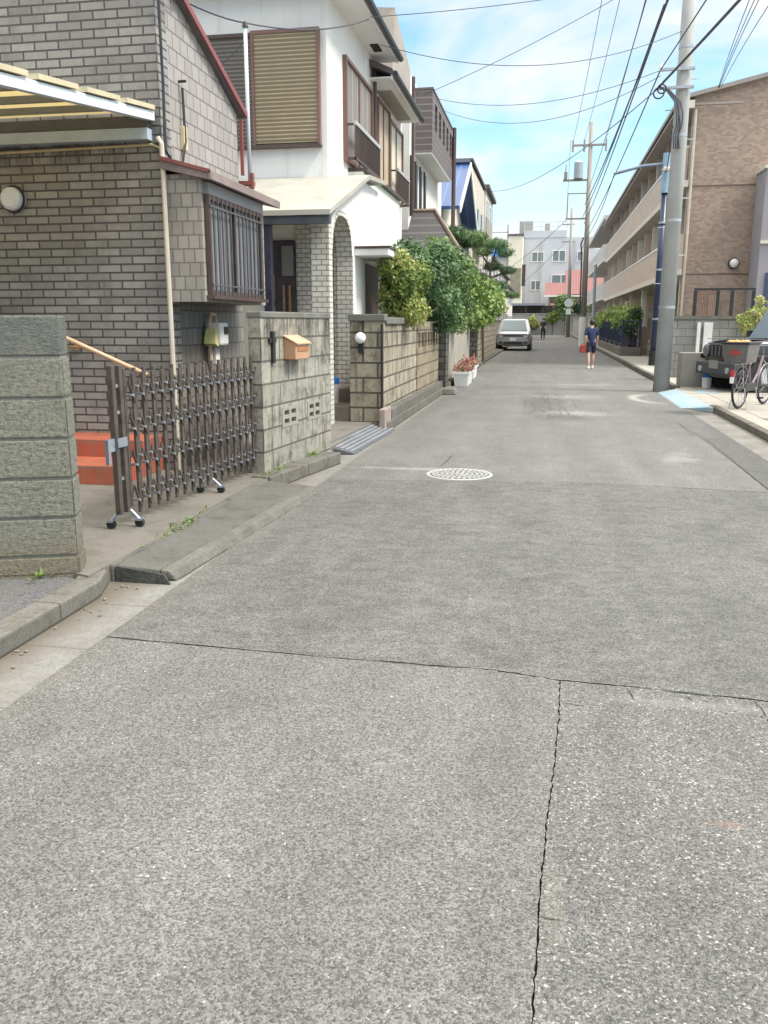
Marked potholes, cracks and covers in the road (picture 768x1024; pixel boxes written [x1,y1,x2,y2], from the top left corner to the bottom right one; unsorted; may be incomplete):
crack [531,682,561,1024]
manhole cover [426,468,493,480]
